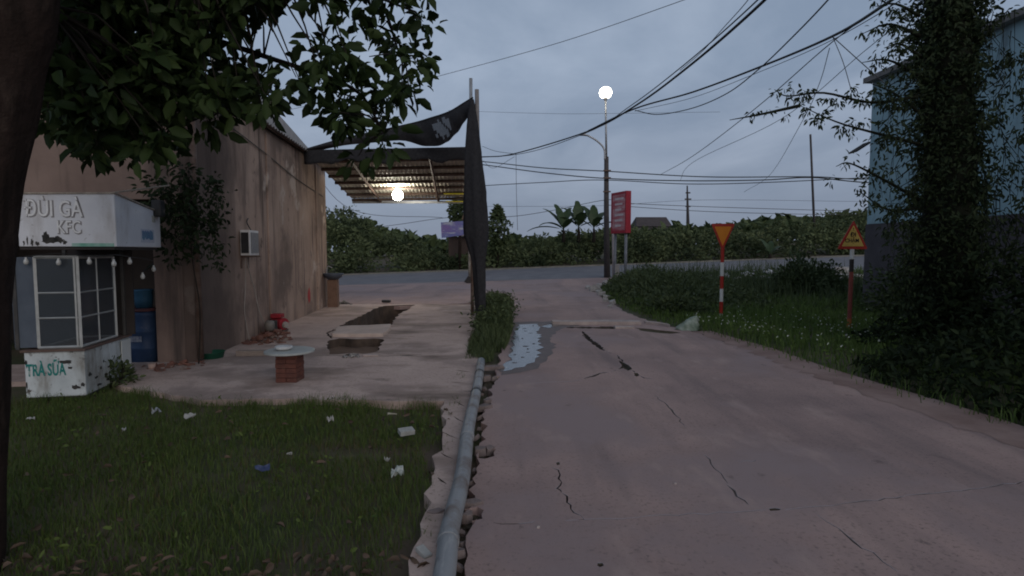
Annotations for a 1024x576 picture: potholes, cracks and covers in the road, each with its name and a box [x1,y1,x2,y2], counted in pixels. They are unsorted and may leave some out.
crack [568,331,651,382]
